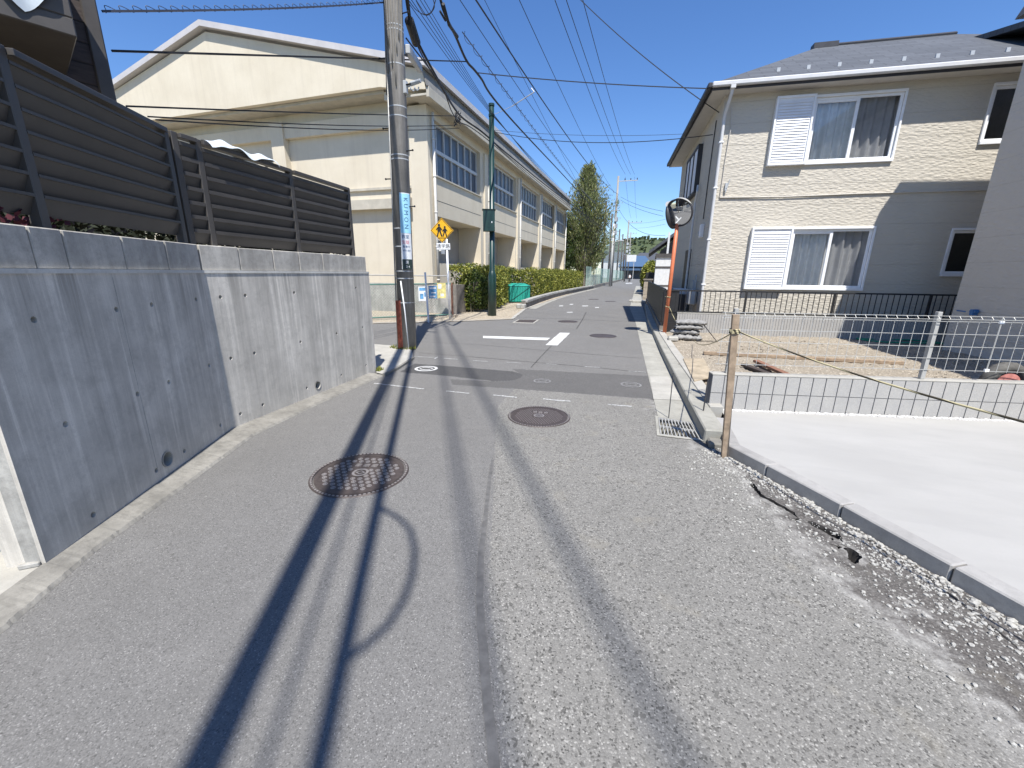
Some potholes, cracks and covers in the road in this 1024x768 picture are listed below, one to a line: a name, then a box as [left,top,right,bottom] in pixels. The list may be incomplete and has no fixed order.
manhole cover [308,453,409,498]
drain grate [655,416,703,441]
crack [743,480,806,520]
manhole cover [508,406,570,428]
